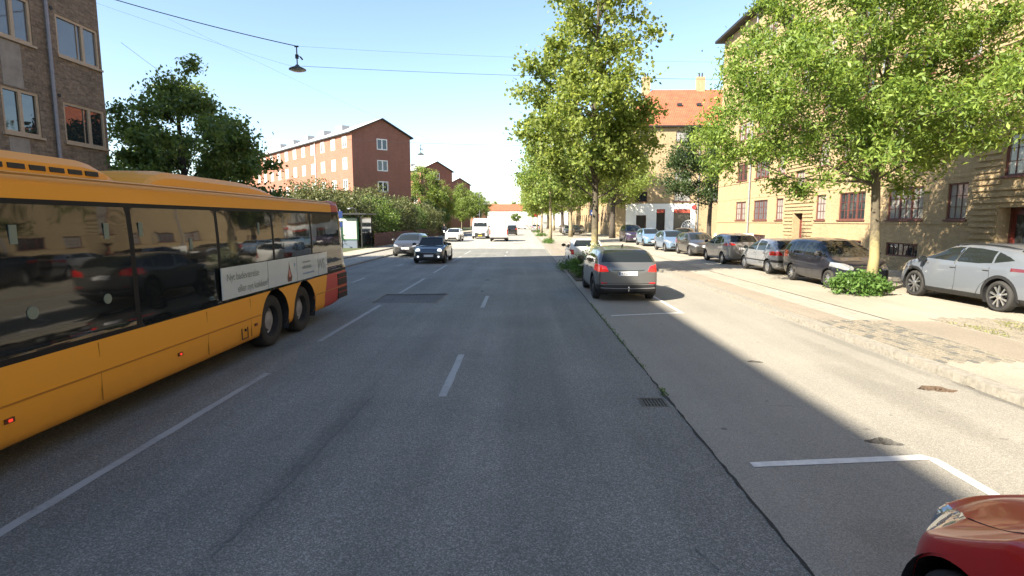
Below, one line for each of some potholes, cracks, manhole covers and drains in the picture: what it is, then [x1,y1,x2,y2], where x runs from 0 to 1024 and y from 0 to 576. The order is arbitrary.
pothole [864,437,904,446]
